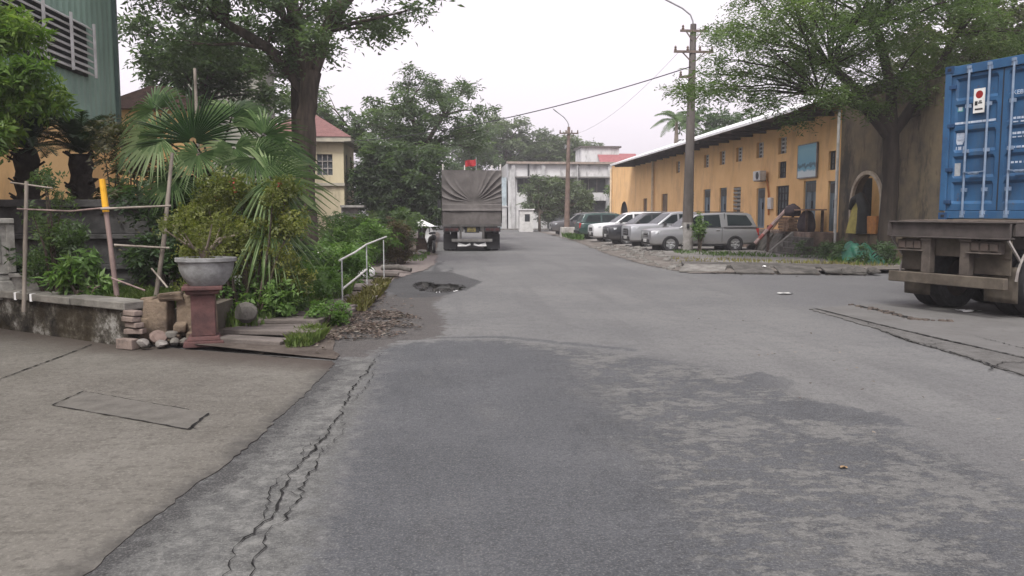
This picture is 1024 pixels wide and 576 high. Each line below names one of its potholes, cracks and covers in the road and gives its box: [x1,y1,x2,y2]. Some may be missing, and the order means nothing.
pothole [412,282,466,293]
crack [205,352,383,576]
manhole cover [52,391,209,430]
